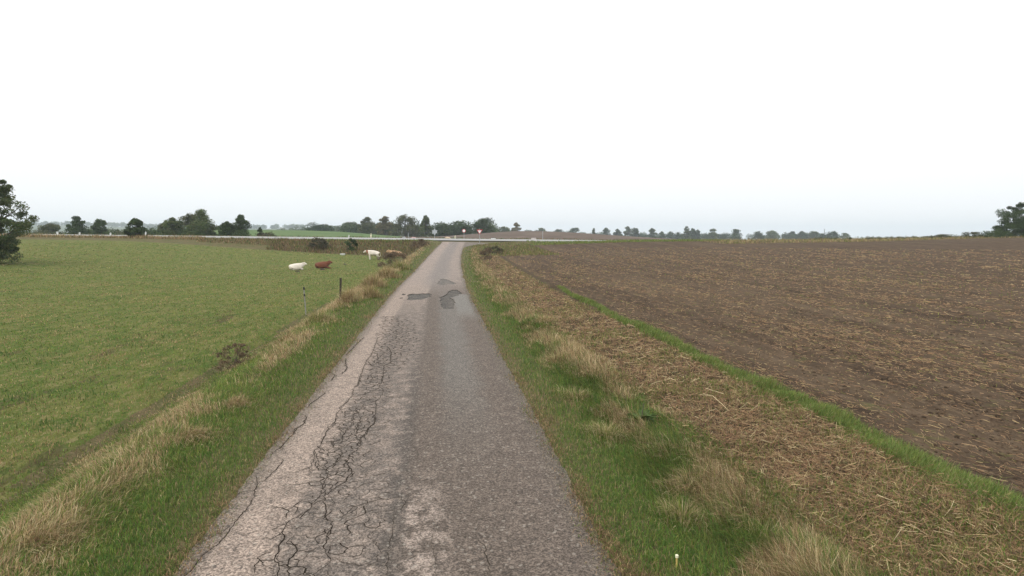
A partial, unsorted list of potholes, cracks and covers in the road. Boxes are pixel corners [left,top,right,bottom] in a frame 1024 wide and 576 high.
crack [185,316,420,576]
pothole [439,290,462,309]
